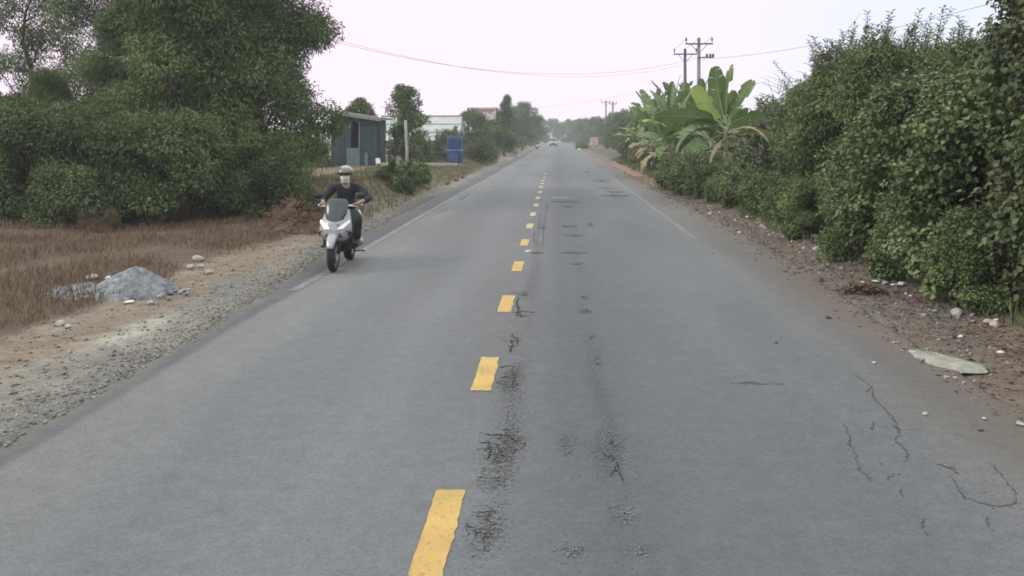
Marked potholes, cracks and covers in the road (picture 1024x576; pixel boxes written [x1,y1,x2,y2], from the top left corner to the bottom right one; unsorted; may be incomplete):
crack [612,505,638,526]
crack [553,540,586,564]
crack [464,419,544,557]
crack [831,375,1023,549]
crack [553,431,635,484]
crack [495,291,536,405]
